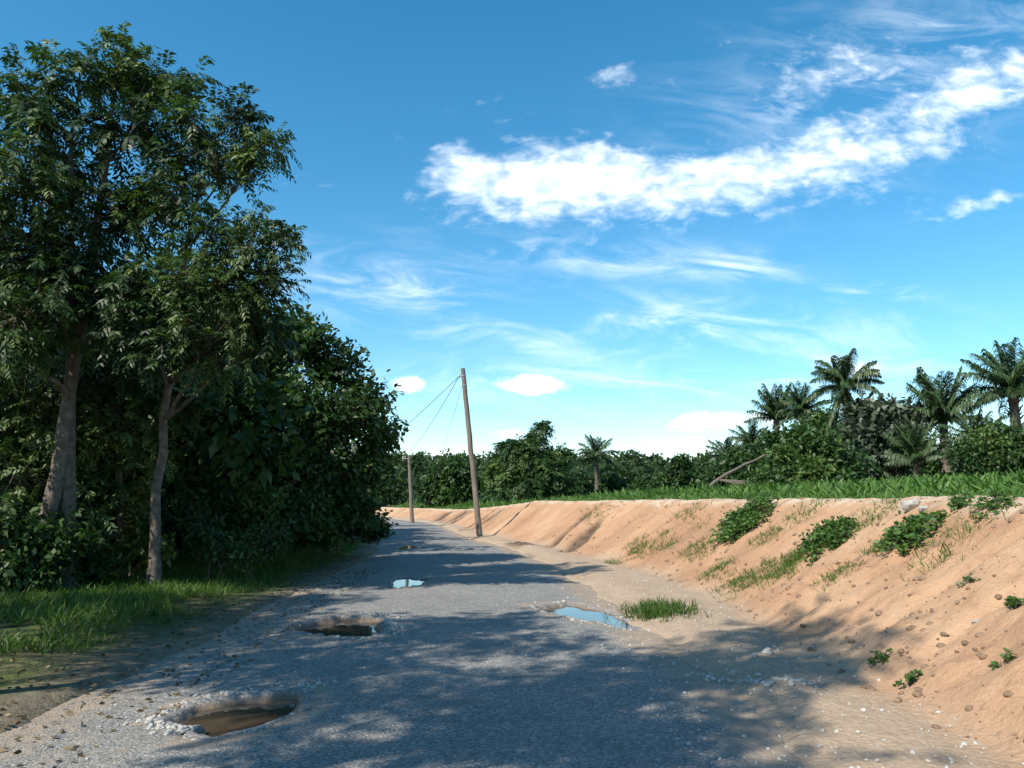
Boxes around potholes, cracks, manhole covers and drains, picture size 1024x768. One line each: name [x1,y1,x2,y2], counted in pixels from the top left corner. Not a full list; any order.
pothole [153,687,316,741]
pothole [530,602,642,631]
pothole [387,576,431,589]
pothole [274,613,393,639]
